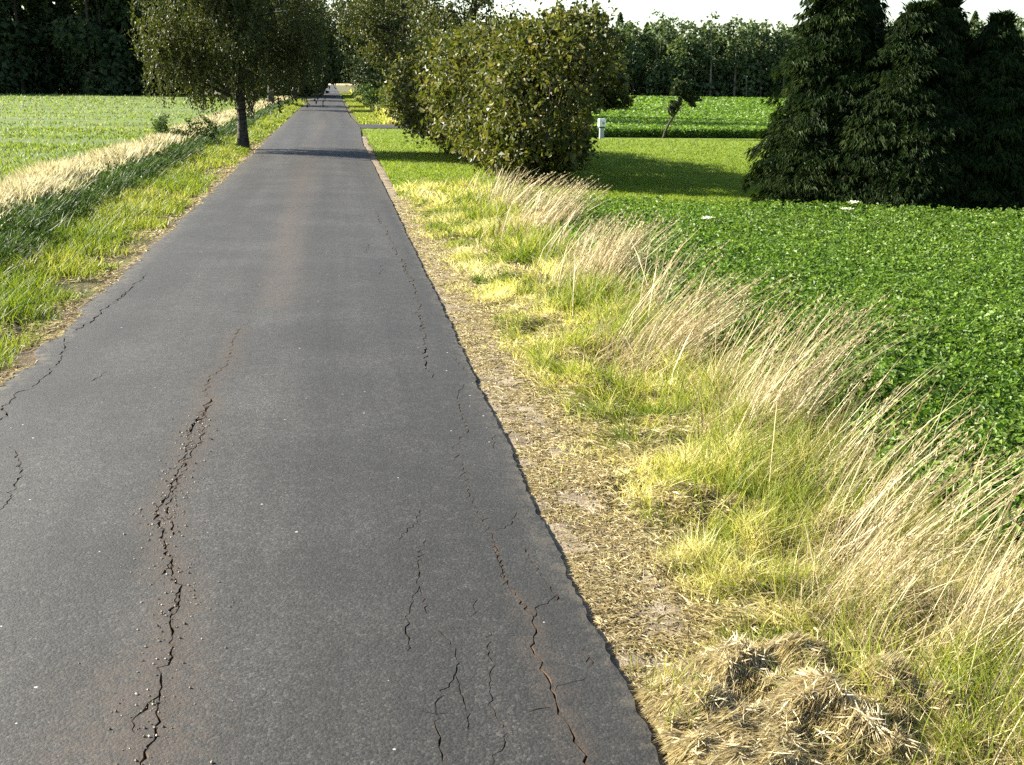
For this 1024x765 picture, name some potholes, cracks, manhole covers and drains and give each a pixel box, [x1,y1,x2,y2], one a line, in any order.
crack [0,273,148,420]
crack [0,446,23,510]
crack [399,385,594,765]
crack [366,210,436,380]
crack [131,329,240,765]
